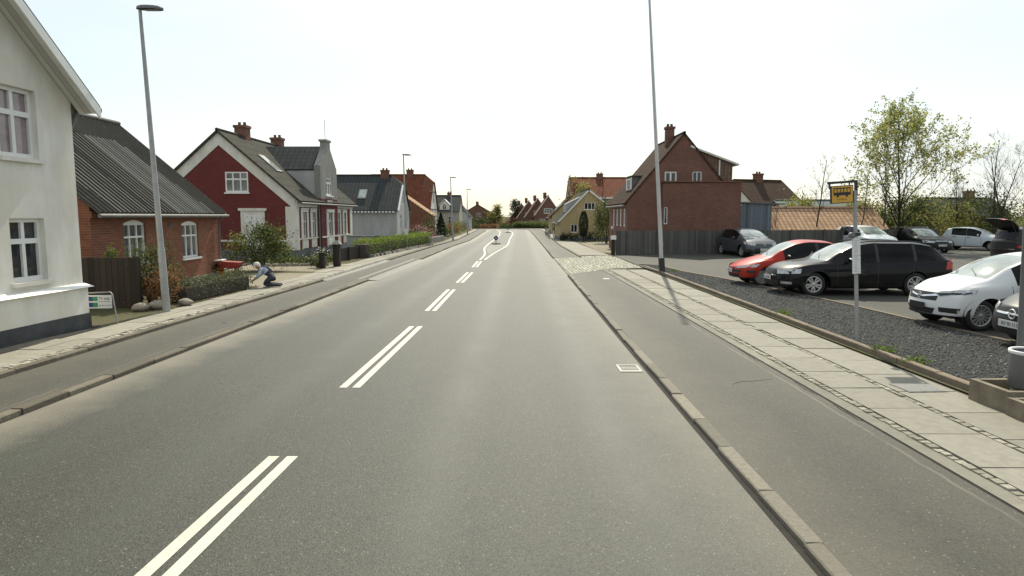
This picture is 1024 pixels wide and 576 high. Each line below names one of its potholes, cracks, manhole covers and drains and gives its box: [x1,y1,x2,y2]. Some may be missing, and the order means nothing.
manhole cover [889,383,948,393]
